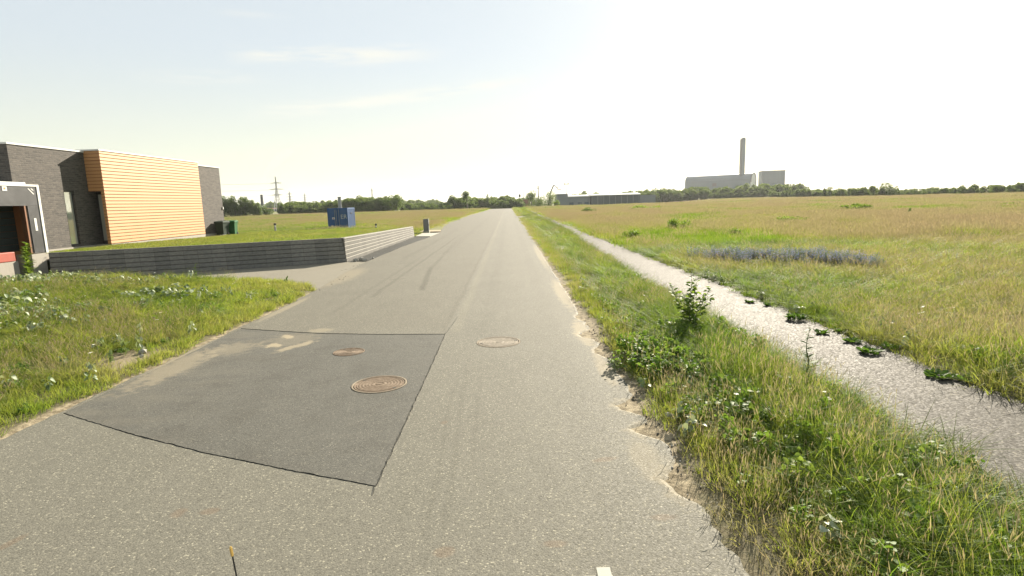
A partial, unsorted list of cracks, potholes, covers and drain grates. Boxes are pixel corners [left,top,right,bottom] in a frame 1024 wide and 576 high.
manhole cover [333,348,365,356]
manhole cover [477,336,520,348]
manhole cover [351,375,407,394]
